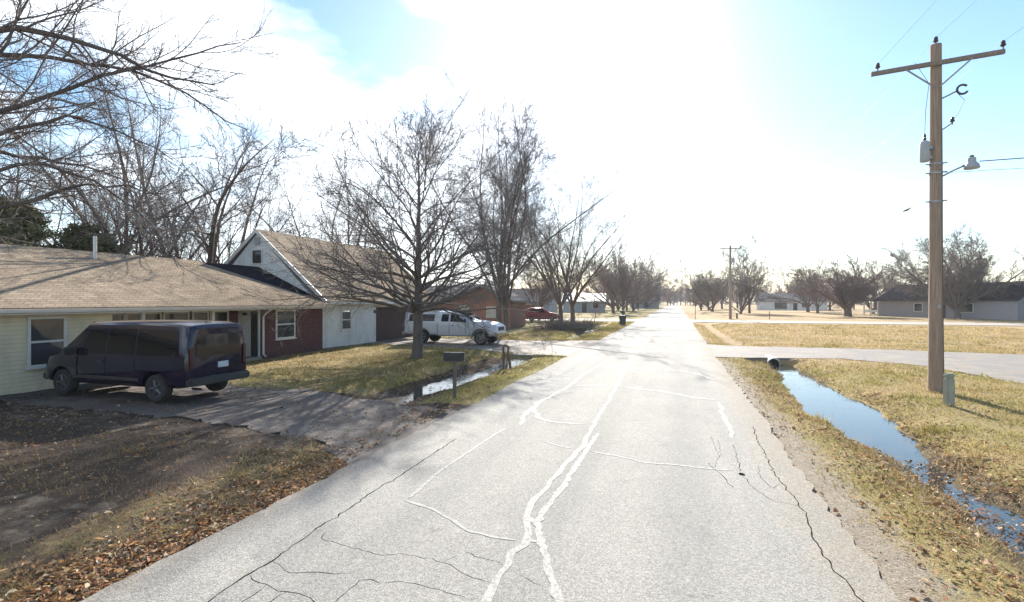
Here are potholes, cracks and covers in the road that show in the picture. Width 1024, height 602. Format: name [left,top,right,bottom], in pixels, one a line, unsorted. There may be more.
crack [208,439,539,602]
crack [709,427,863,602]
